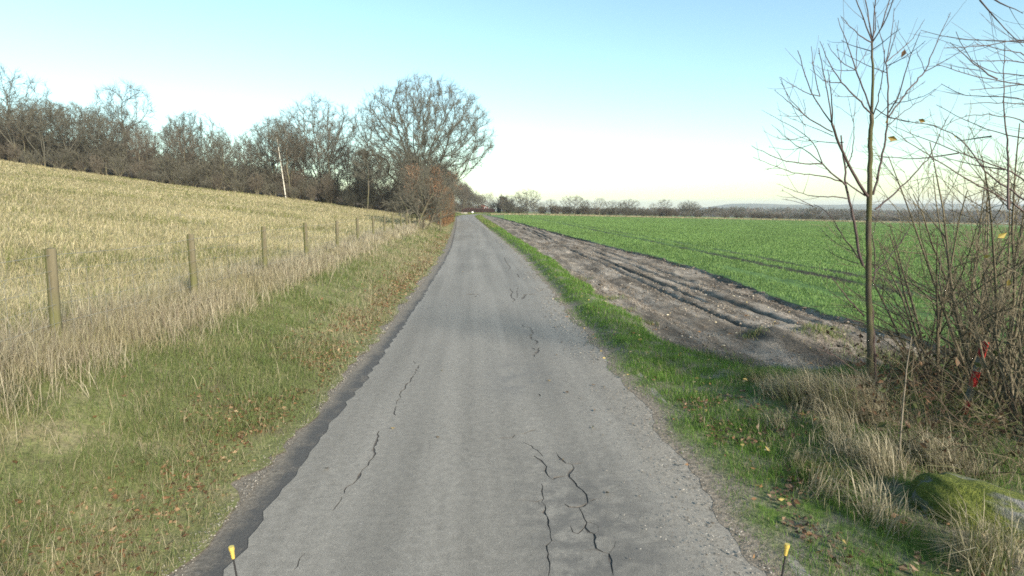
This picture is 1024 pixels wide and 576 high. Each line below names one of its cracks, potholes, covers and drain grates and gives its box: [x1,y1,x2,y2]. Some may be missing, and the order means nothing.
crack [504,258,533,302]
crack [333,361,419,510]
crack [498,430,616,576]
